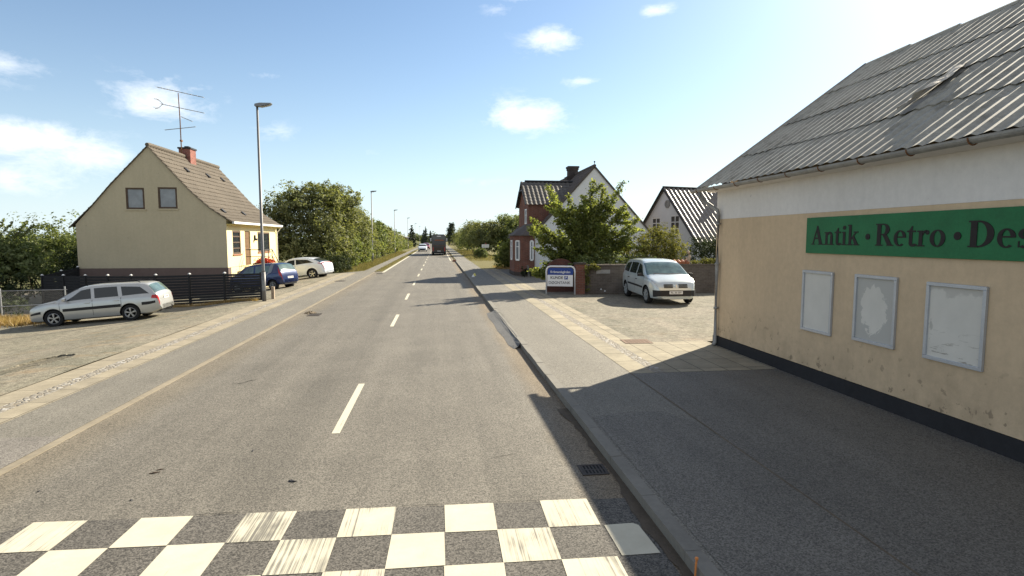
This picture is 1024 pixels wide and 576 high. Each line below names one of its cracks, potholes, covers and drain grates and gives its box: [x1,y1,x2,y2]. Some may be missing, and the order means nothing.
drain grate [577,464,610,476]
